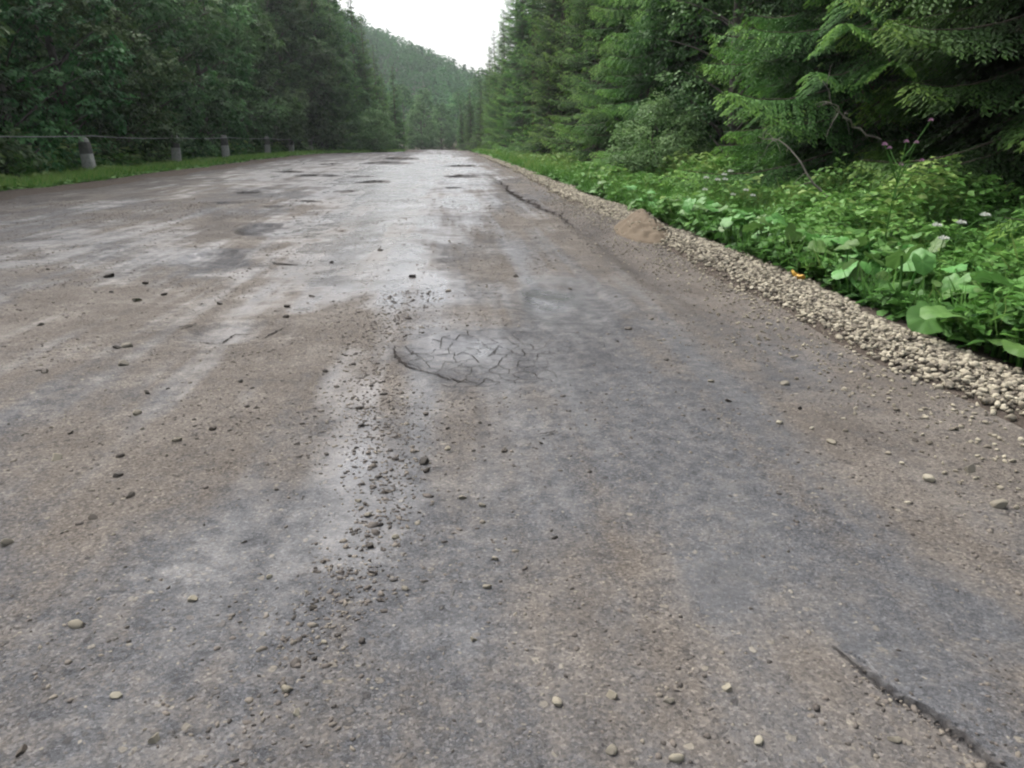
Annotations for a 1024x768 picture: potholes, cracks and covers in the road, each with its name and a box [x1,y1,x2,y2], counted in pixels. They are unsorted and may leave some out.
crack [497,180,578,229]
crack [393,330,580,387]
crack [831,645,1008,768]
pothole [230,223,306,238]
